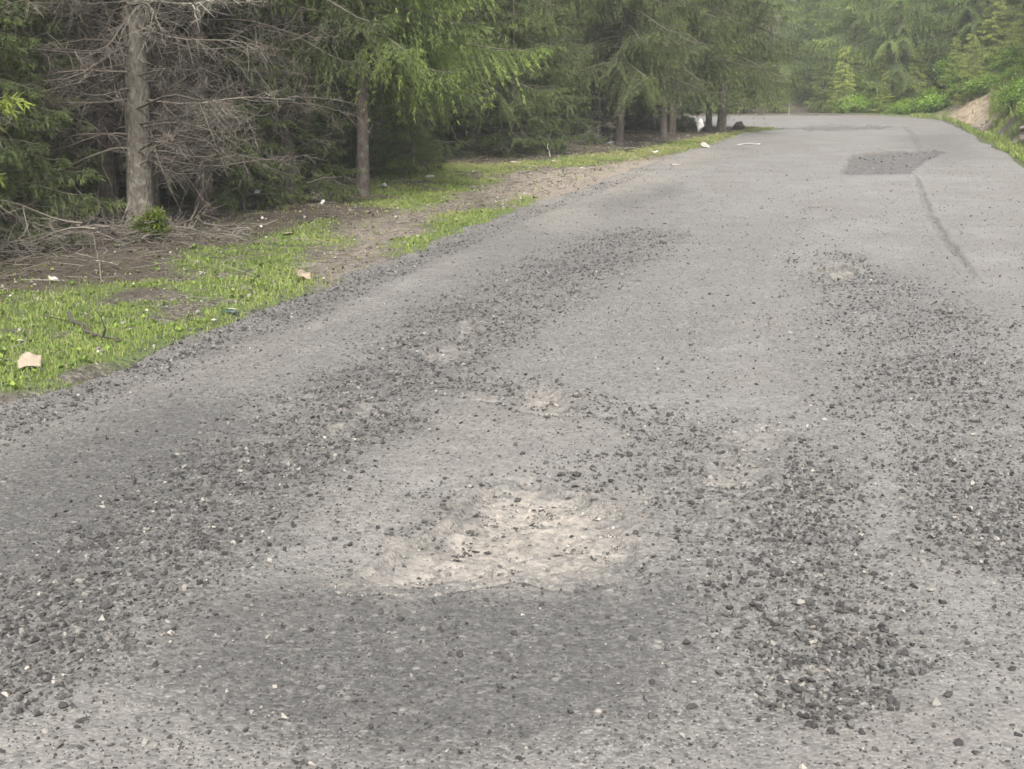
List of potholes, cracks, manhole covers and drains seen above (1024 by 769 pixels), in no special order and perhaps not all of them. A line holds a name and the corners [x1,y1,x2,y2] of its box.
crack [907,175,992,283]
pothole [807,262,866,285]
pothole [336,475,654,600]
pothole [463,387,589,416]
pothole [411,320,489,367]
